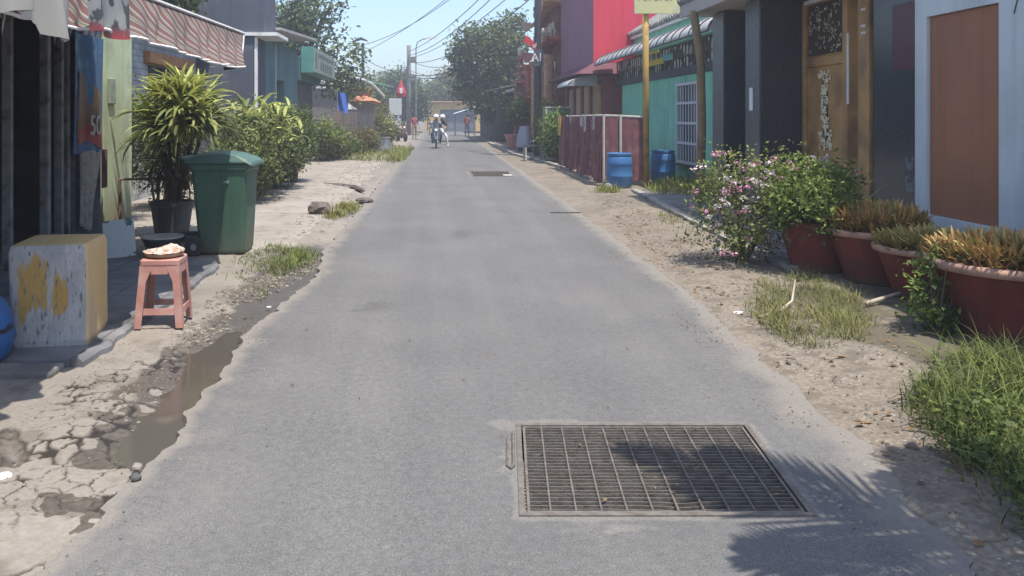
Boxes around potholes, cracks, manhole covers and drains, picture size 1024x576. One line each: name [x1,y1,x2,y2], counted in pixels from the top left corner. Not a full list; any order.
pothole [112,329,237,456]
crack [0,337,209,576]
drain grate [506,423,817,517]
